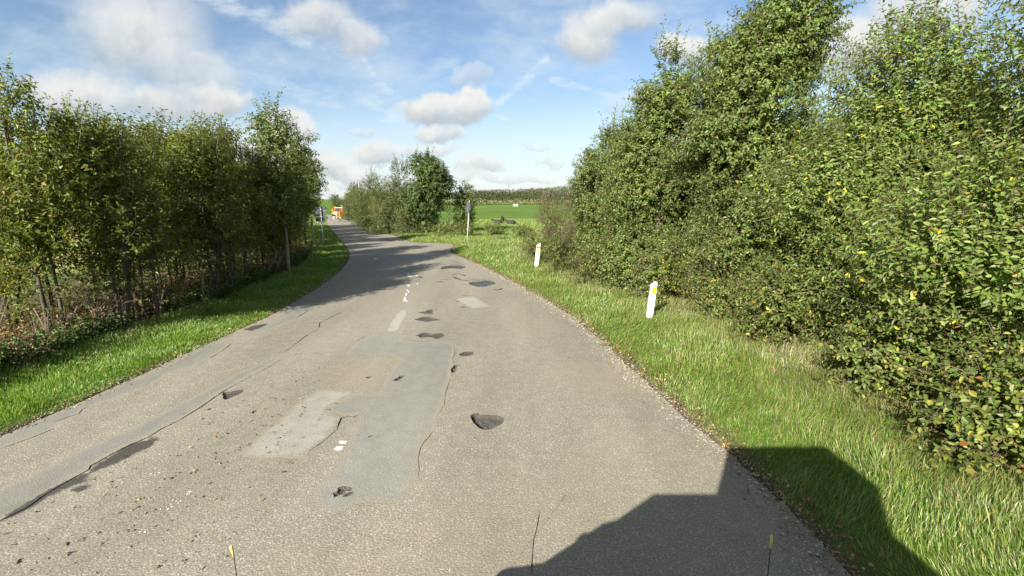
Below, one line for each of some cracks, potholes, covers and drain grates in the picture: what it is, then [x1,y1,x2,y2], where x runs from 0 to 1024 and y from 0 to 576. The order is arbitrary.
crack [0,304,339,521]
crack [531,510,540,569]
pothole [222,390,244,400]
pothole [333,486,352,498]
pothole [470,413,504,430]
